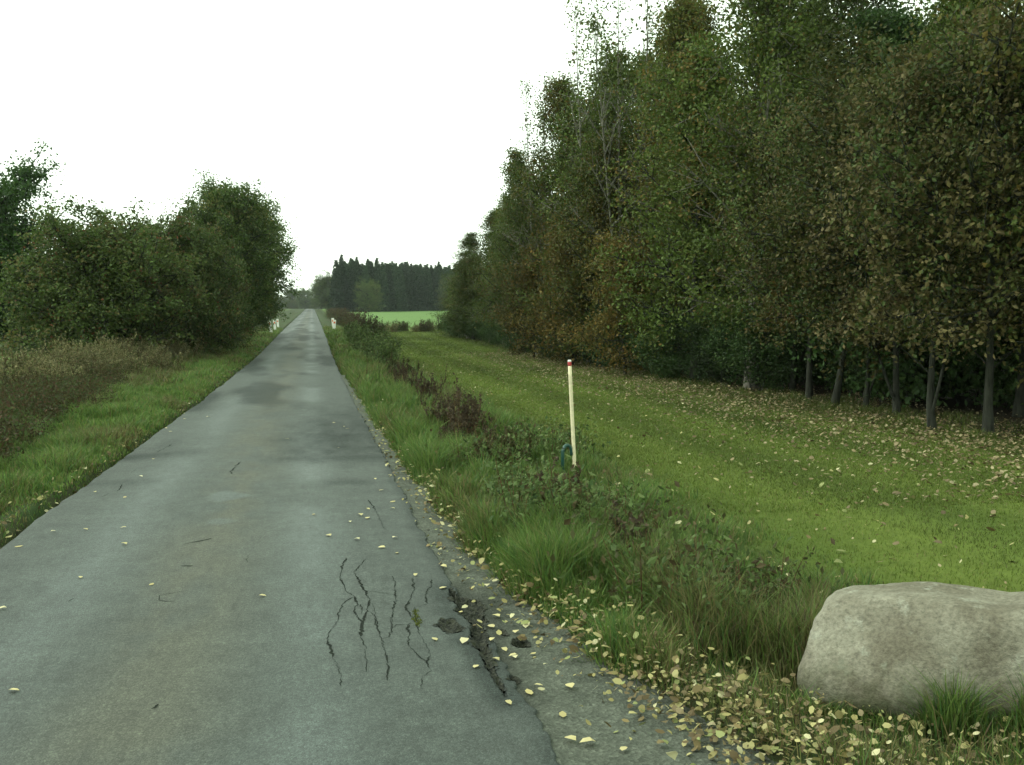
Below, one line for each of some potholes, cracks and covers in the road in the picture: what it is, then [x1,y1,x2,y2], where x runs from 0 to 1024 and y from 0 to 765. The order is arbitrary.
crack [326,558,433,686]
pothole [433,617,466,634]
pothole [510,636,531,648]
pothole [447,587,507,694]
